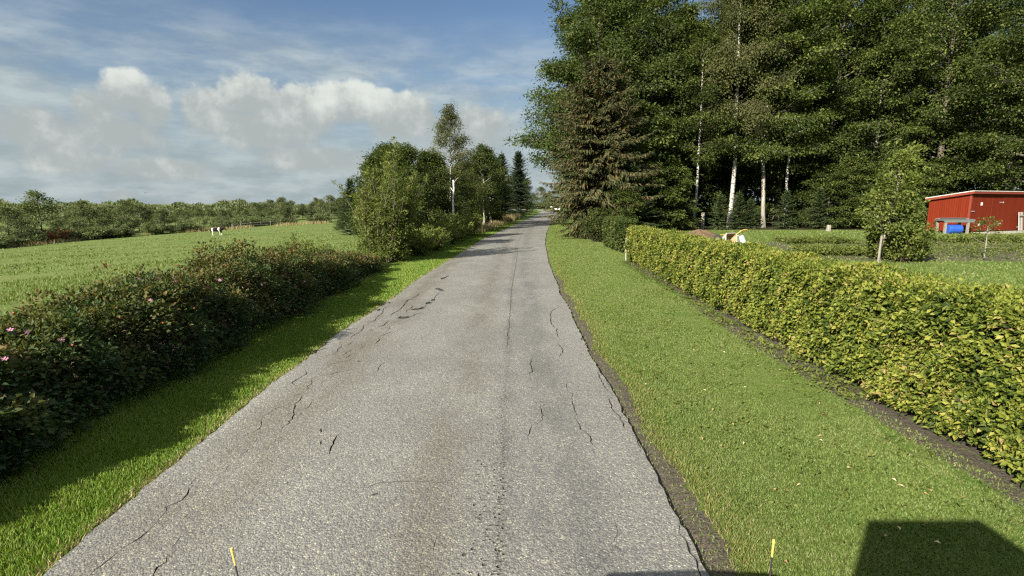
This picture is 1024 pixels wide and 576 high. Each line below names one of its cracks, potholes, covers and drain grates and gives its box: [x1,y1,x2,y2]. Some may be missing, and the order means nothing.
crack [566,371,641,454]
crack [91,475,200,576]
crack [217,293,438,476]
